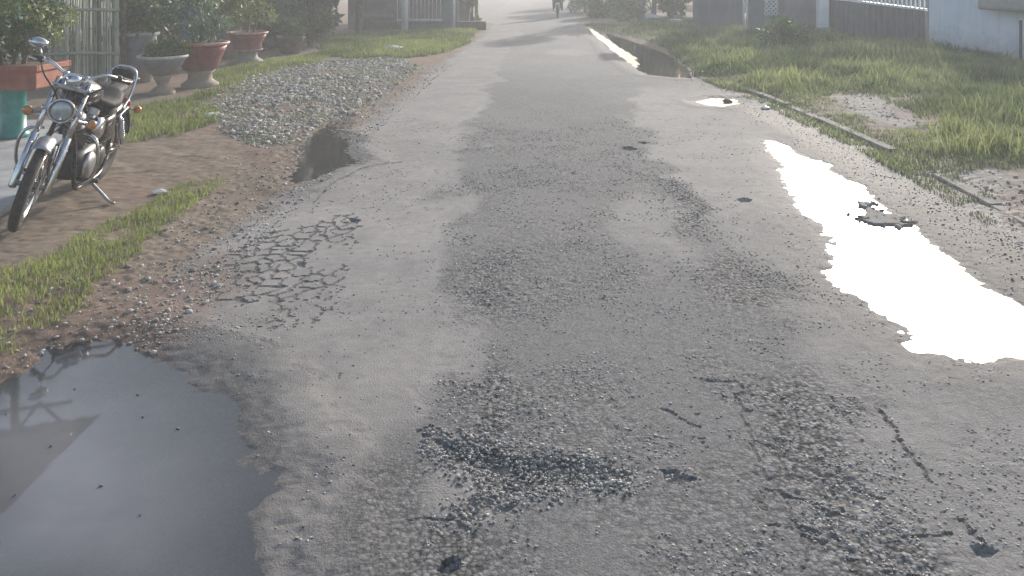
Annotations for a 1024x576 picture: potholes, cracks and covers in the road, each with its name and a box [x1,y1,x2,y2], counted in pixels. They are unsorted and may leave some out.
crack [884,518,988,548]
pothole [436,555,464,575]
pothole [414,429,635,525]
crack [189,161,402,330]
pothole [658,469,698,487]
pothole [969,543,1000,558]
crack [658,377,948,573]
